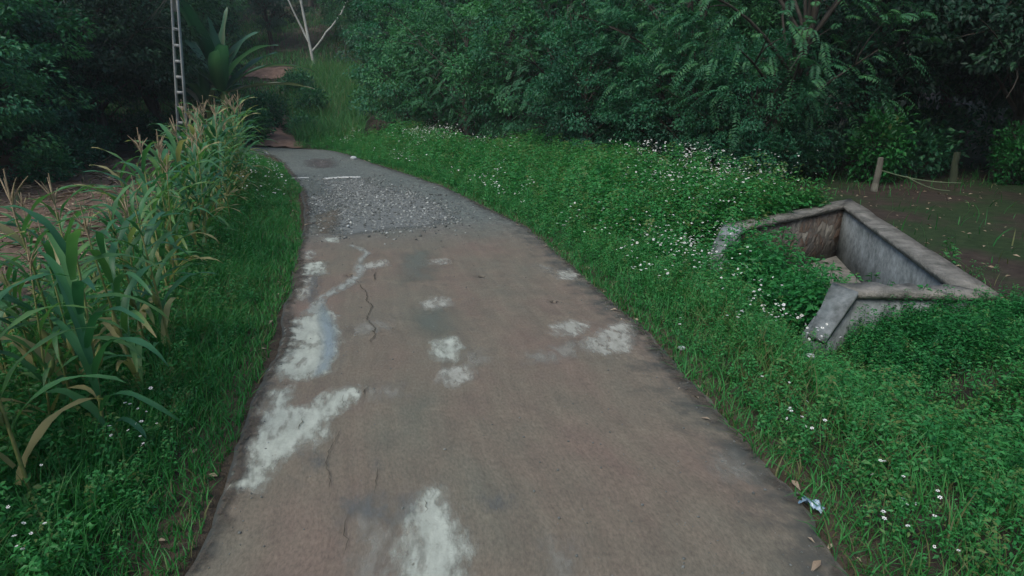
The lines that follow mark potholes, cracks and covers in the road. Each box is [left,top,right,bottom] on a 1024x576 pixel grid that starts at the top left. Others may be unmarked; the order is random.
crack [358,272,376,340]
